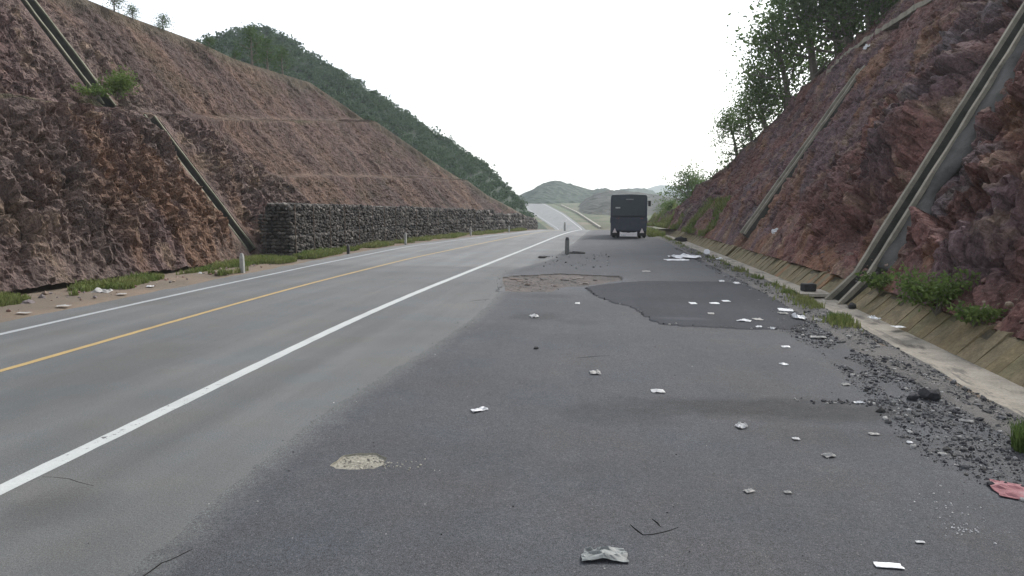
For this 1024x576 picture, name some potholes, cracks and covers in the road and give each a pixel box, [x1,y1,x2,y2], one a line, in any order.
crack [143,549,192,576]
pothole [499,273,623,292]
pothole [330,453,435,471]
crack [630,519,678,535]
